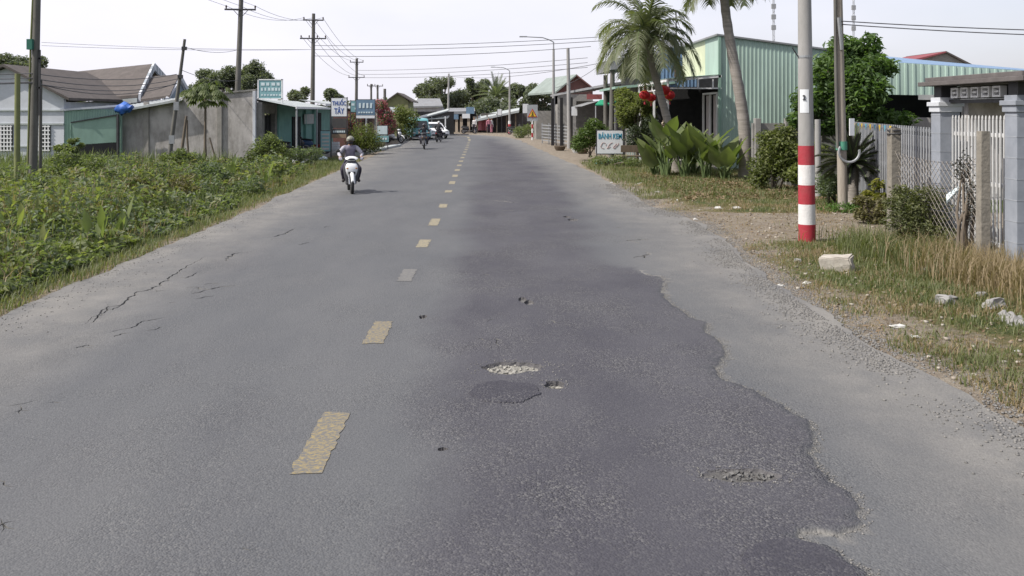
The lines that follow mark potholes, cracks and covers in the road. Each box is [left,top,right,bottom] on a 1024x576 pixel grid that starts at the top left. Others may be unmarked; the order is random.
pothole [481,362,544,375]
pothole [699,468,782,483]
pothole [544,381,565,389]
crack [76,256,228,349]
